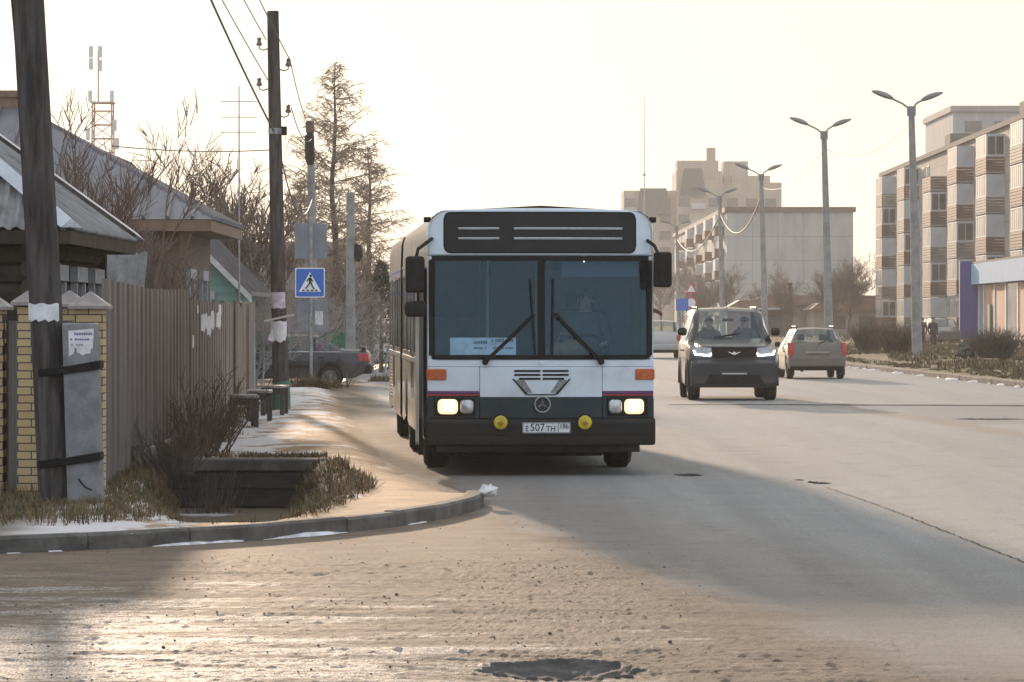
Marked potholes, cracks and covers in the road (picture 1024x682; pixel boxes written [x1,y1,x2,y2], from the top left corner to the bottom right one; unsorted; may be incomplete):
pothole [474,657,650,682]
